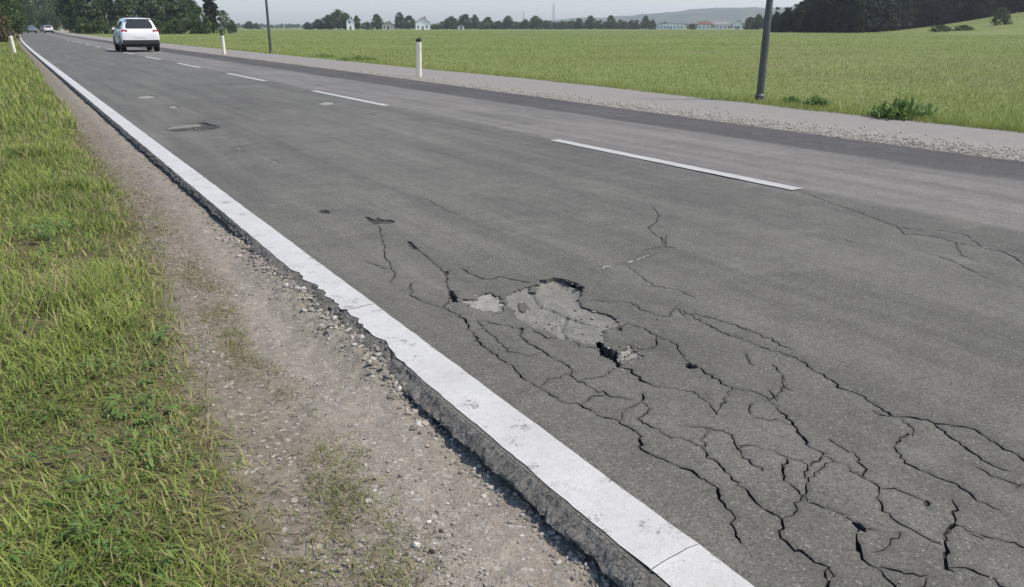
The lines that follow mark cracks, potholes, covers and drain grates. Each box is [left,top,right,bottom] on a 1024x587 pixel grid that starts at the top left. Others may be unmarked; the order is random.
crack [595,209,672,270]
pothole [166,122,219,132]
pothole [365,217,394,225]
pothole [462,292,505,313]
pothole [505,278,619,344]
pothole [596,342,621,368]
crack [364,227,1024,587]
pothole [617,347,644,362]
crack [808,194,1024,278]
